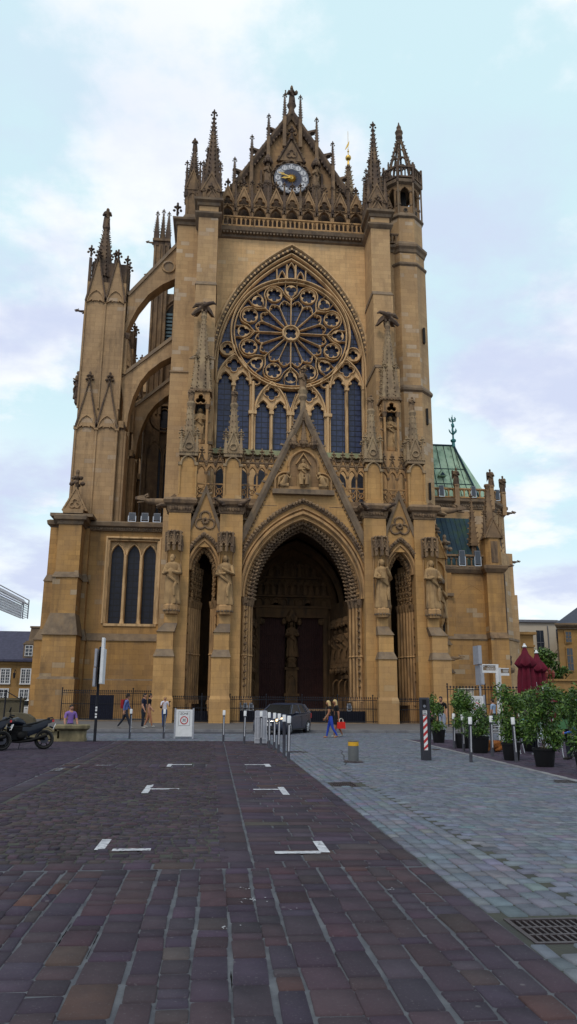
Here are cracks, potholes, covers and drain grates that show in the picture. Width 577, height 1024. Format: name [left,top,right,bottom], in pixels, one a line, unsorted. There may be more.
drain grate [503,917,577,945]
